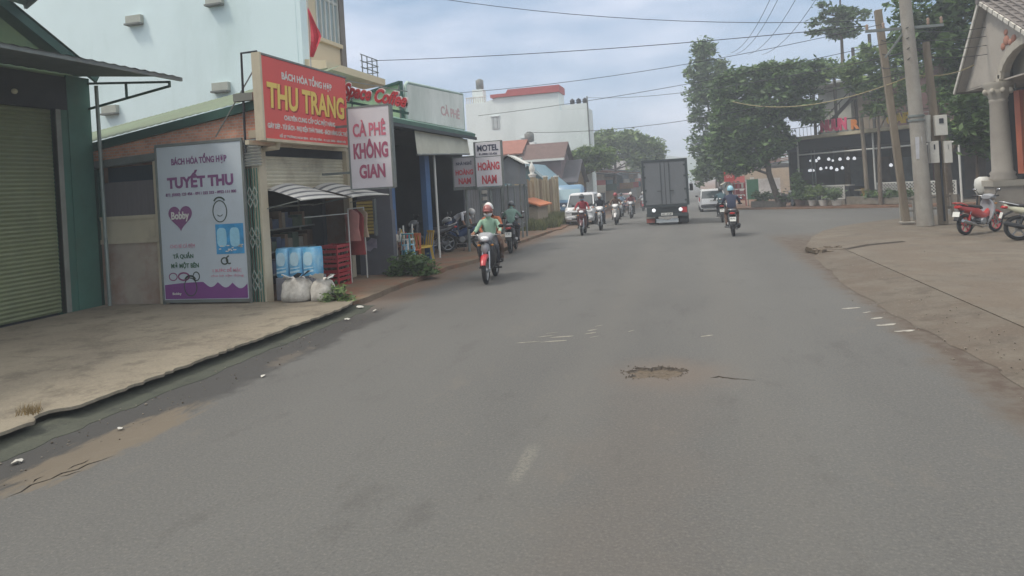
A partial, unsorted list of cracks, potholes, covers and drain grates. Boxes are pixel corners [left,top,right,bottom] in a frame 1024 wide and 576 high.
crack [6,456,112,498]
pothole [620,365,689,380]
